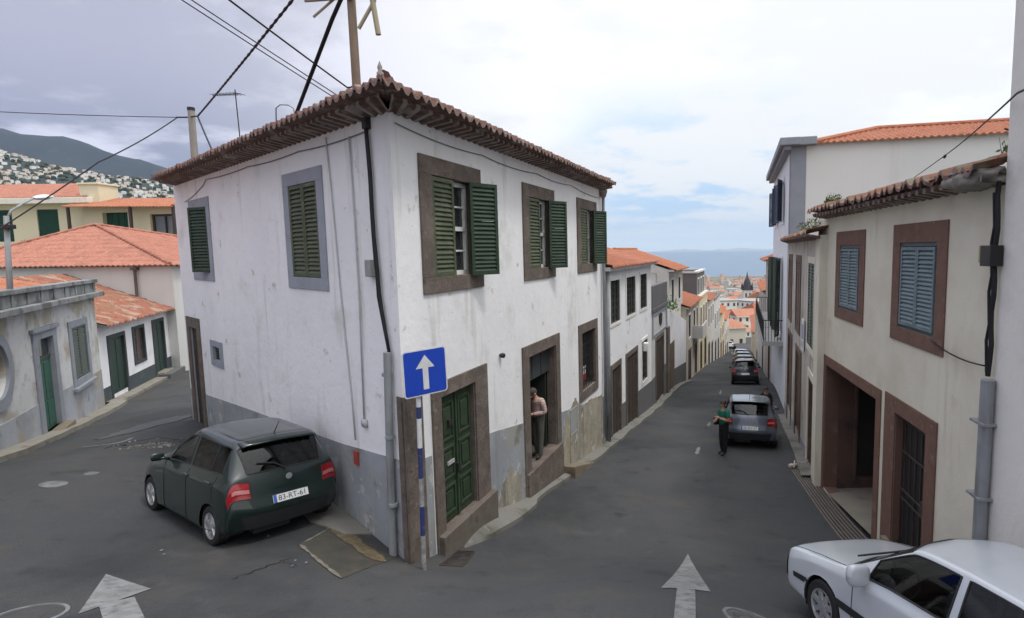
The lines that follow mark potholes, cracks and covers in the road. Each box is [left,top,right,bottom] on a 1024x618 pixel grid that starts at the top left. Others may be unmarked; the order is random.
manhole cover [722,607,765,618]
drain grate [791,470,868,540]
pothole [98,437,187,452]
